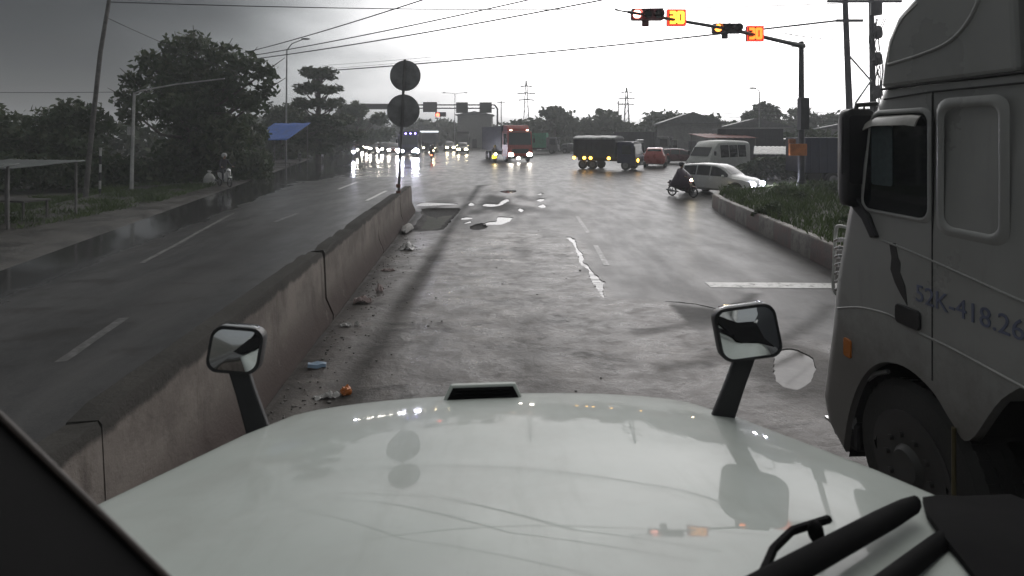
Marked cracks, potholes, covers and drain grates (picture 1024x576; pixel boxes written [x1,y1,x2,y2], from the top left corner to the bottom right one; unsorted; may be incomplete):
pothole [411,207,461,232]
